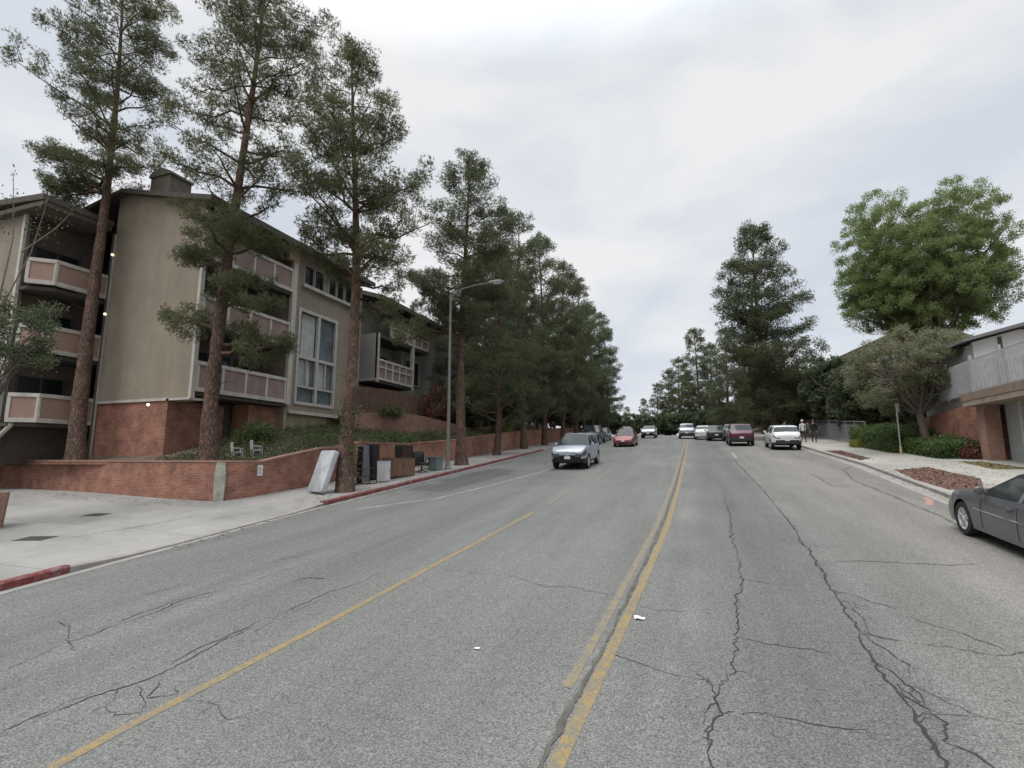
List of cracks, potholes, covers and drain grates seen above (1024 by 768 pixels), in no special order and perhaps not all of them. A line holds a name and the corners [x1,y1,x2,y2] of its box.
crack [617,458,1023,768]
crack [1,568,387,736]
